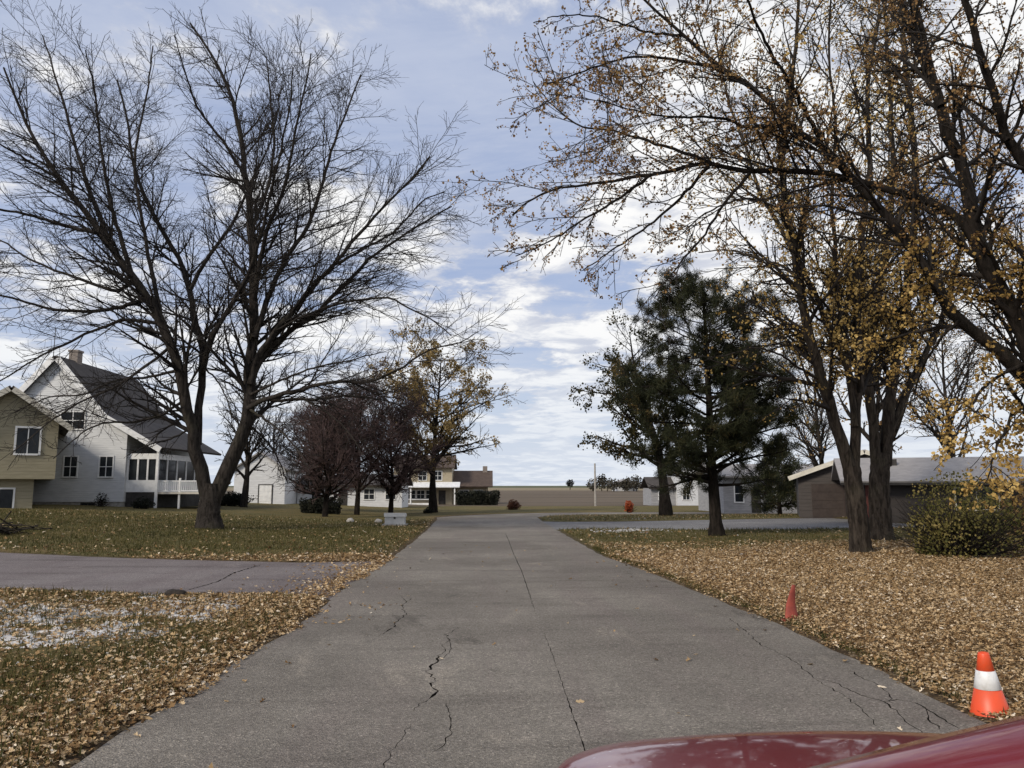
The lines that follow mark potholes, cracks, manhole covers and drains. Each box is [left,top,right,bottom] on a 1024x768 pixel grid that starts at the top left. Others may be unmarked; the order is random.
crack [383,629,455,768]
crack [726,617,958,733]
